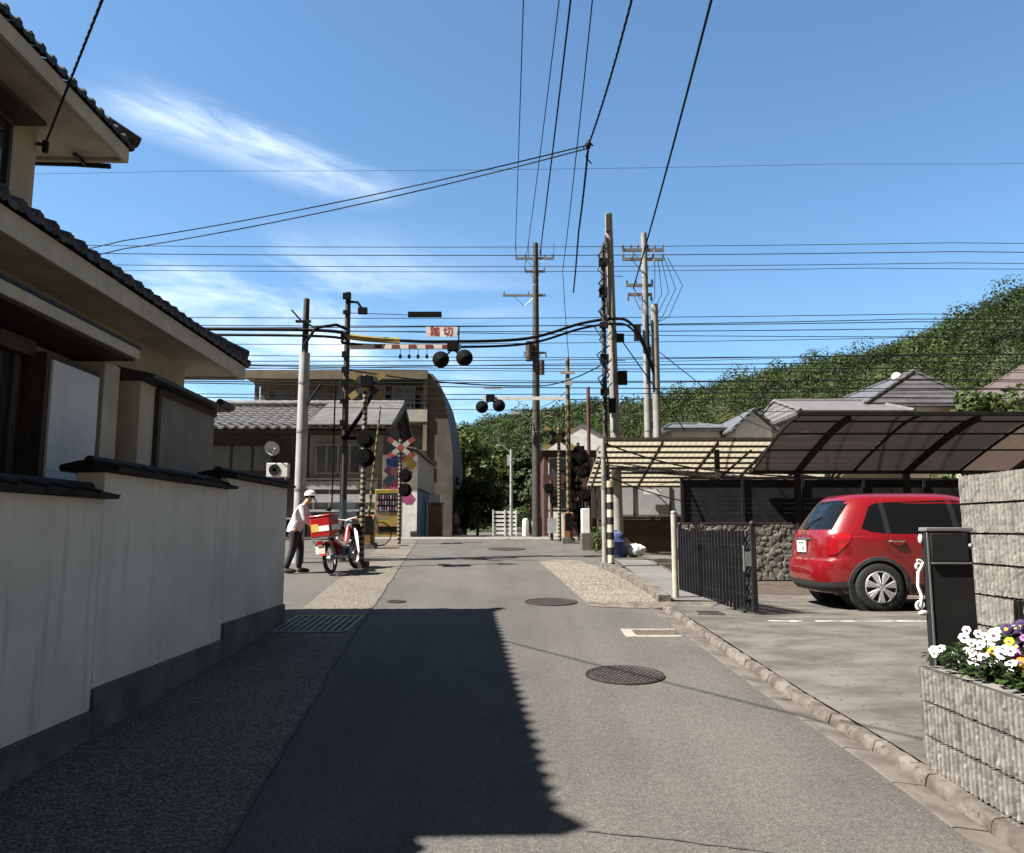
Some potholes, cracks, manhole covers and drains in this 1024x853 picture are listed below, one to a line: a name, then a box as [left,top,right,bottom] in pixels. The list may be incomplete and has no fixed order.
manhole cover [525,598,578,606]
drain grate [620,629,683,637]
manhole cover [585,665,665,685]
